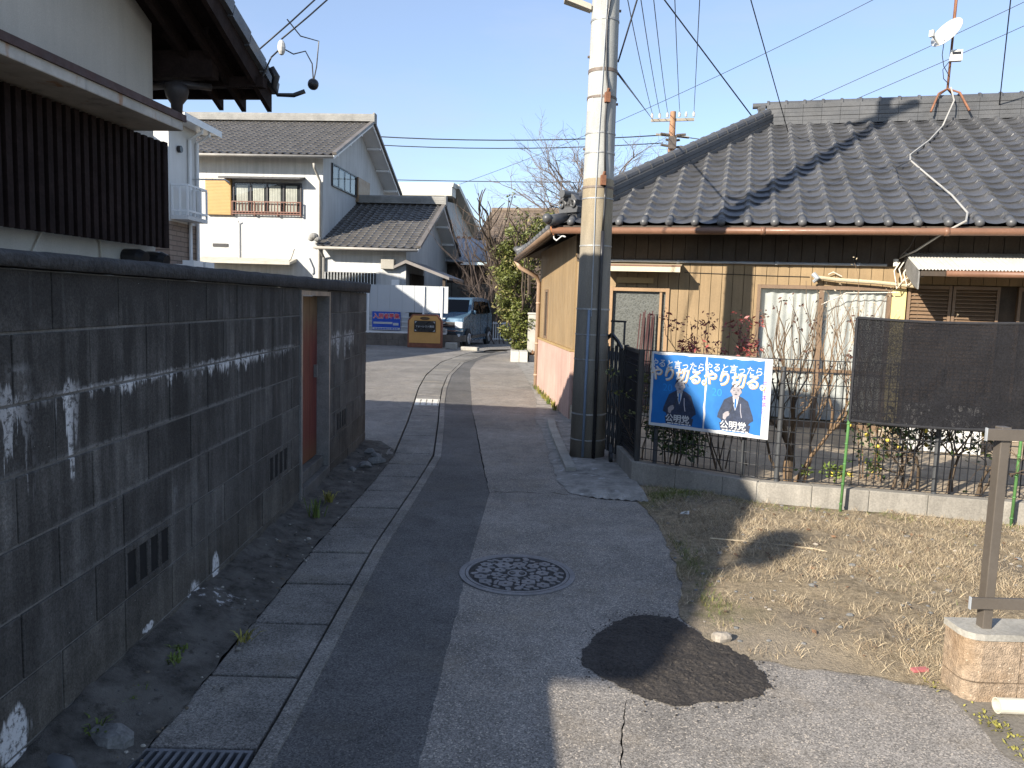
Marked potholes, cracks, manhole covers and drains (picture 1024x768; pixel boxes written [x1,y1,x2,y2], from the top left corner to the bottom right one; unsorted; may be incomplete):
manhole cover [459,554,575,596]
drain grate [127,748,253,768]
